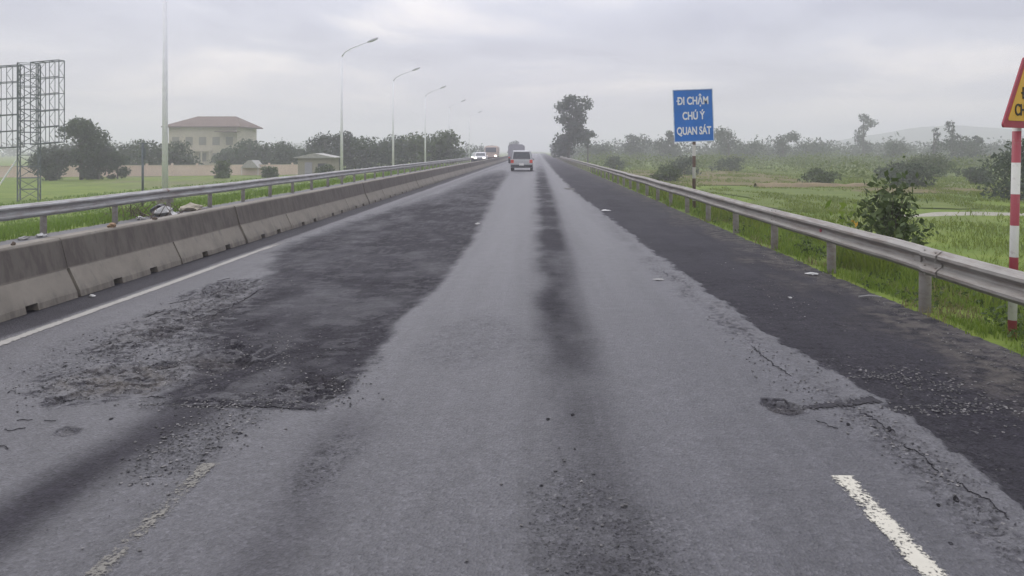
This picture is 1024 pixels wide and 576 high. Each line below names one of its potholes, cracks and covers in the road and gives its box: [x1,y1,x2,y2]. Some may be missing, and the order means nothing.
pothole [757,397,811,417]
pothole [65,364,178,401]
pothole [223,343,247,351]
crack [956,481,1010,520]
pothole [199,279,249,303]
pothole [52,426,84,437]
pothole [152,359,181,369]
crack [802,395,939,472]
pothole [38,395,78,408]
pothole [159,302,223,325]
pothole [192,351,258,373]
